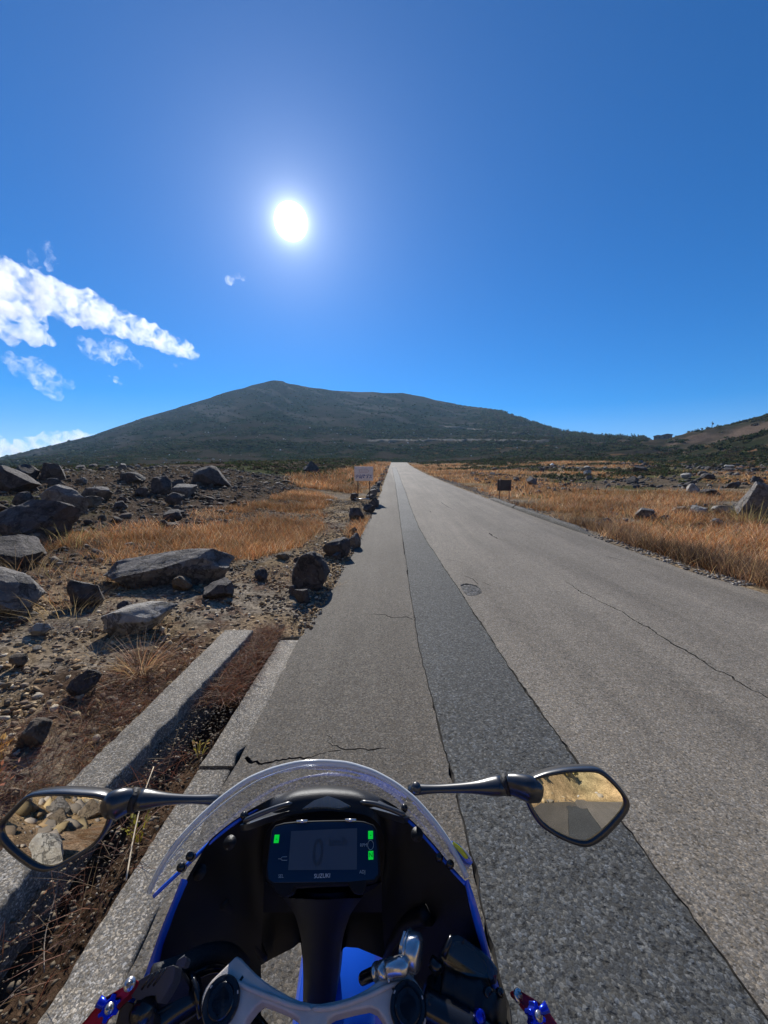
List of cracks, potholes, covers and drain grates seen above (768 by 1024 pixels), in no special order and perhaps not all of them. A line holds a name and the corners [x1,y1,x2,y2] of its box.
crack [245,735,387,765]
crack [570,584,768,698]
